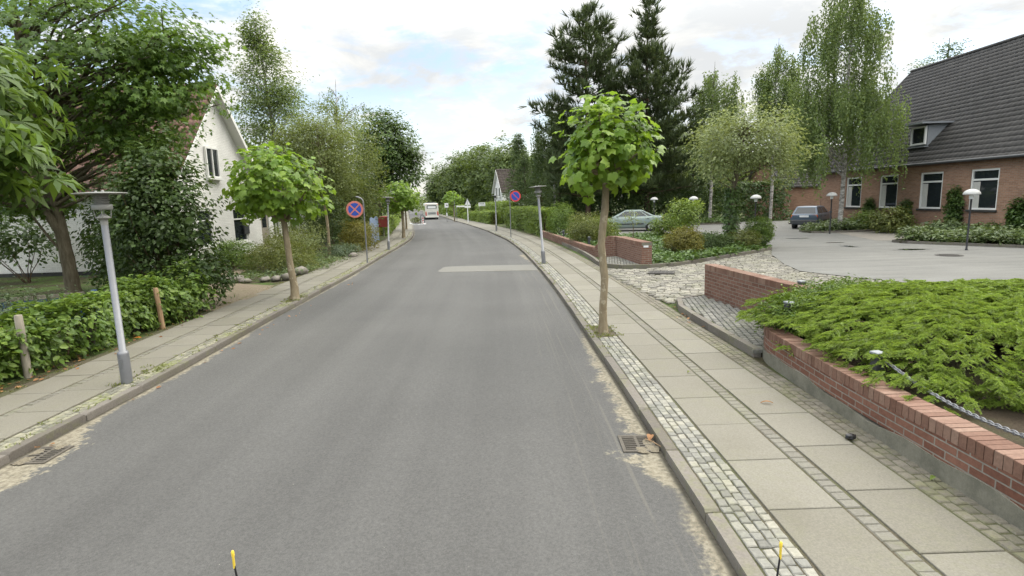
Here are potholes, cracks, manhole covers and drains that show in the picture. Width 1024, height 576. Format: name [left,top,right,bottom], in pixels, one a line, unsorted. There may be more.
drain grate [617,435,659,453]
drain grate [10,444,74,465]
